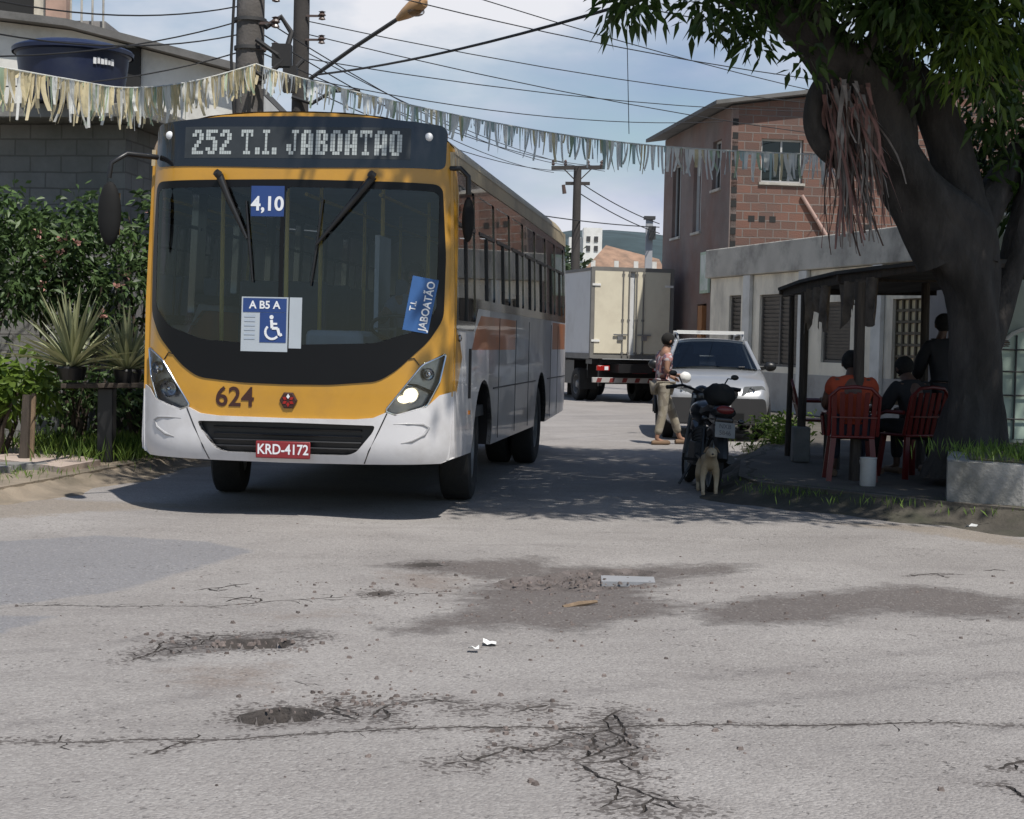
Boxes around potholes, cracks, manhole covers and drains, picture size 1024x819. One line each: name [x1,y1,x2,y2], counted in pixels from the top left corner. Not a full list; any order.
crack [194,583,263,608]
crack [990,760,1024,797]
pothole [234,707,325,726]
crack [28,682,1002,815]
pothole [209,638,296,650]
